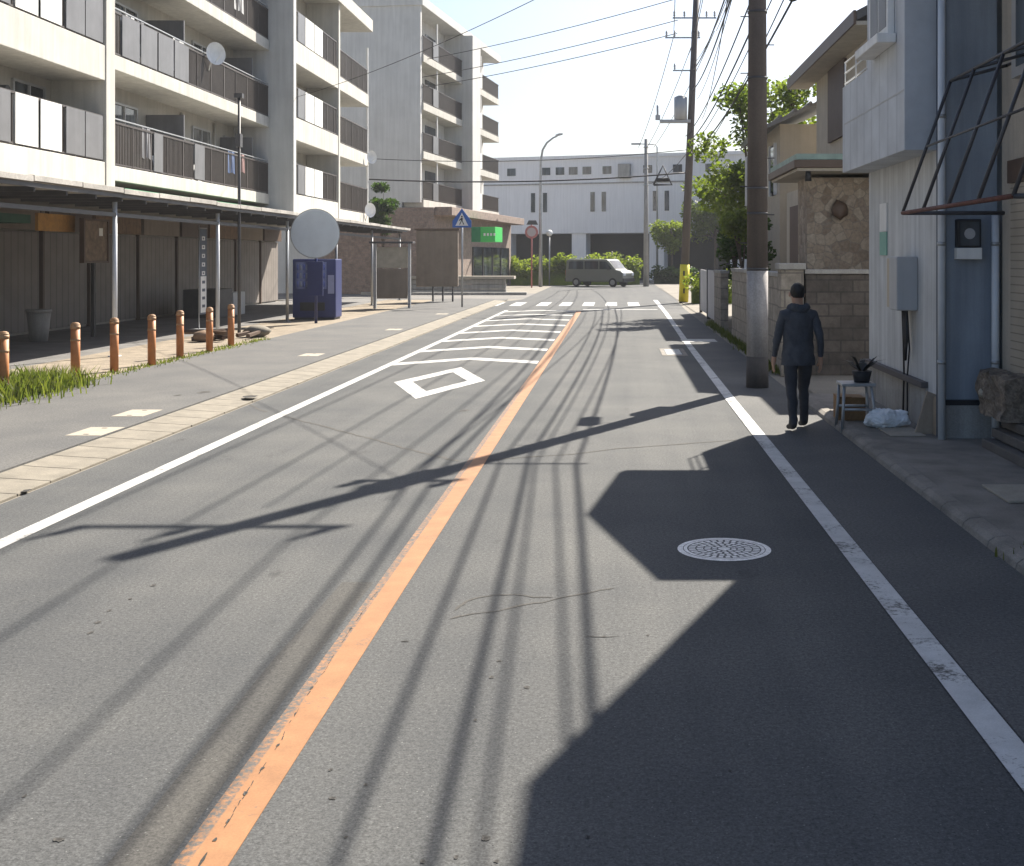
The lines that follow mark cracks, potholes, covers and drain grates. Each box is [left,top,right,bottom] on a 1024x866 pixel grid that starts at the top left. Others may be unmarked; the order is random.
manhole cover [678,538,771,561]
